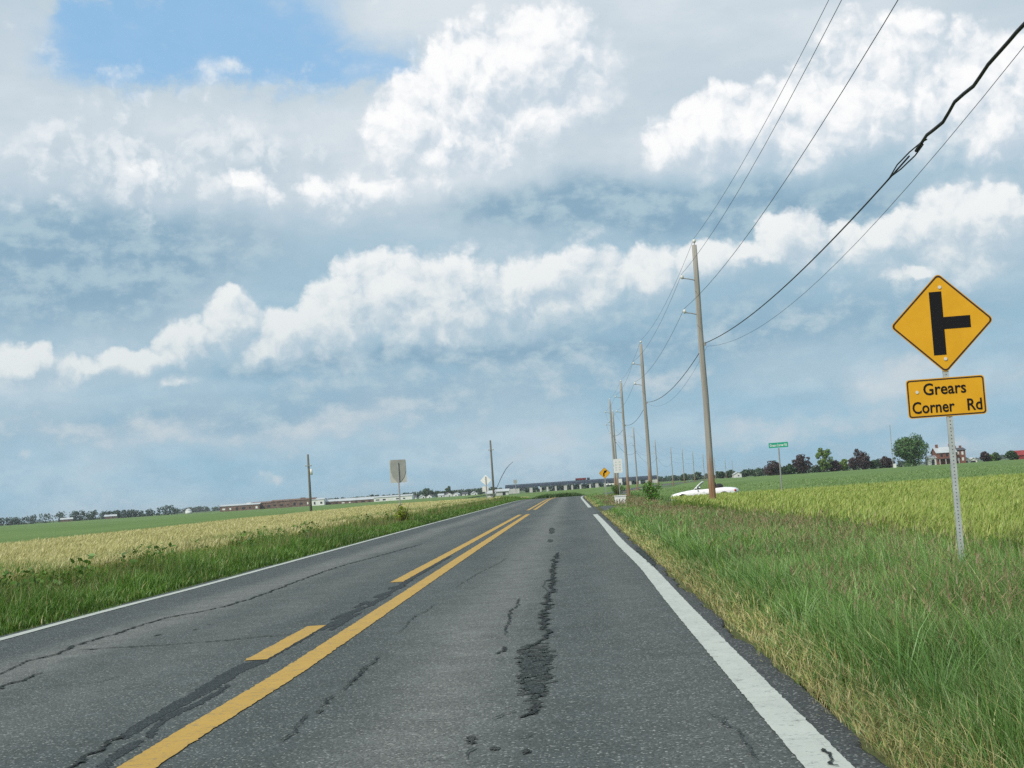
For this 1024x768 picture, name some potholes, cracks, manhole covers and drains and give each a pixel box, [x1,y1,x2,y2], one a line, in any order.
crack [496,552,563,653]
crack [0,544,420,688]
crack [821,748,838,765]
